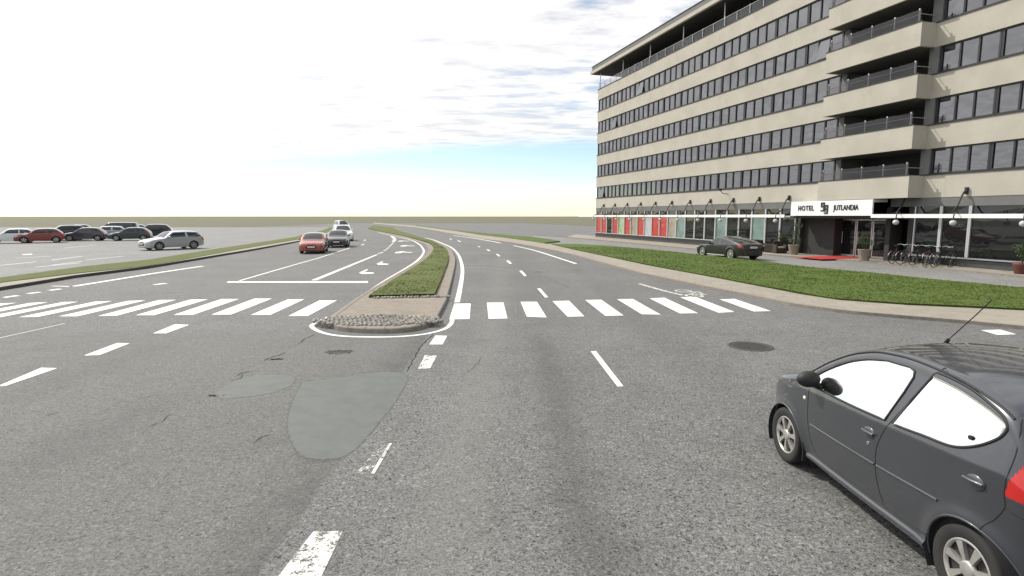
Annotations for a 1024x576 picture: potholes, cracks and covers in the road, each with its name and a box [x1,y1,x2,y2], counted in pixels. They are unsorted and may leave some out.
manhole cover [727,341,774,352]
